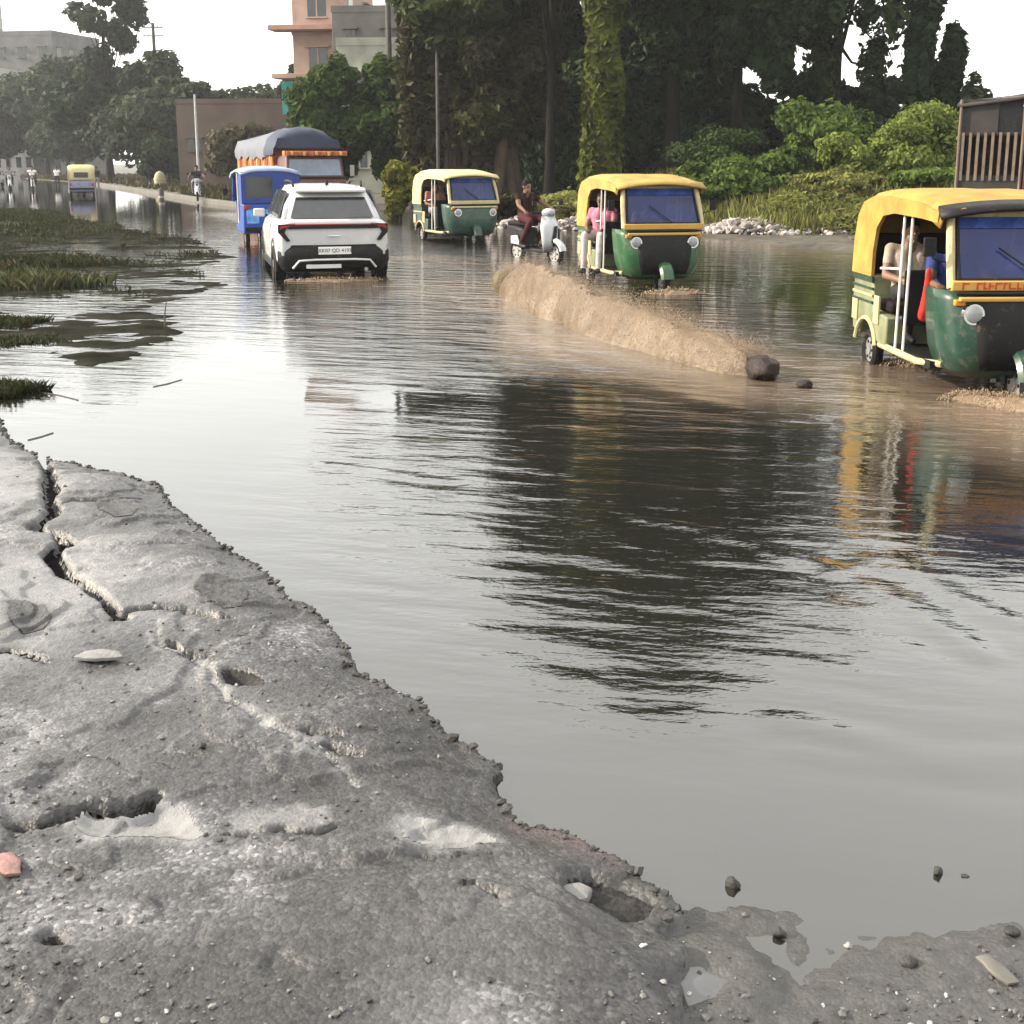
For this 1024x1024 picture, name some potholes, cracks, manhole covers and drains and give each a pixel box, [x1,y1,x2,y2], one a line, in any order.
crack [38,466,125,621]
crack [155,631,360,788]
pothole [73,799,204,840]
pothole [568,878,652,922]
pothole [681,967,723,1006]
pothole [222,669,263,686]
